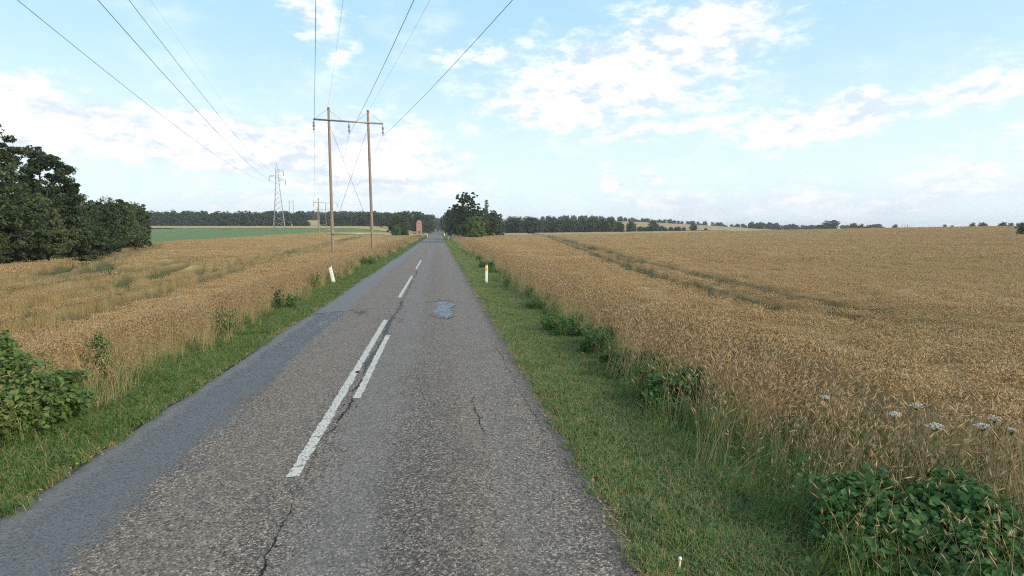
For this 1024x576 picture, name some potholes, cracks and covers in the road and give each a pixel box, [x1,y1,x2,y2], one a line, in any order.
crack [256,380,362,576]
